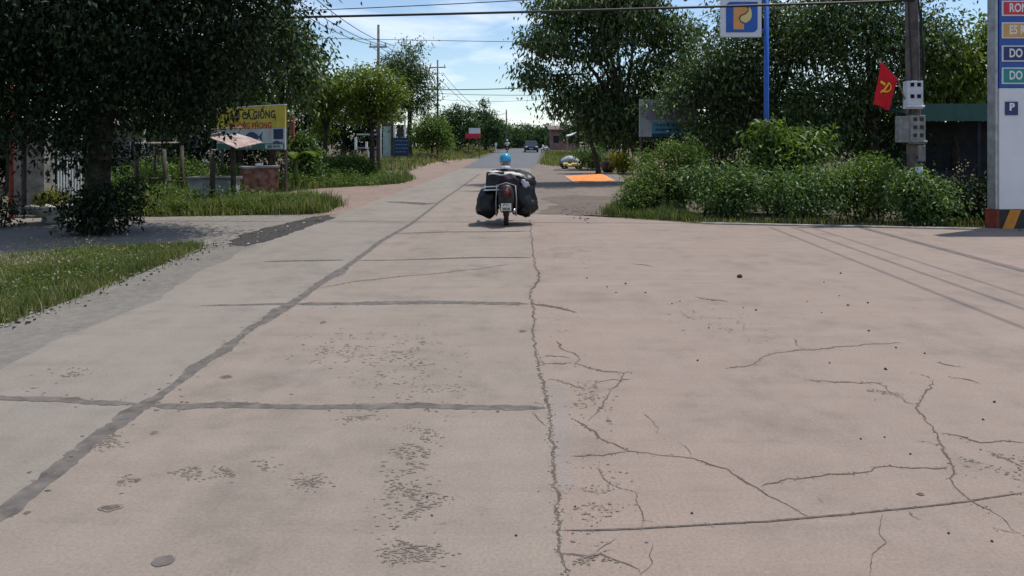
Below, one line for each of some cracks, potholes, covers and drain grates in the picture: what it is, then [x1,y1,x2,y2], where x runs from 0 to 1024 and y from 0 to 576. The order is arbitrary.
crack [528,221,1024,576]
